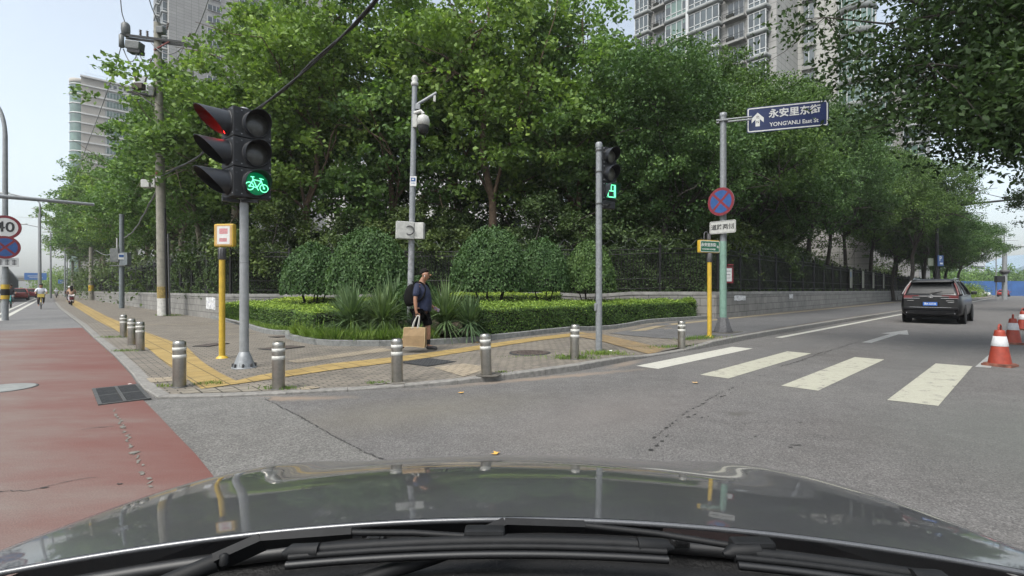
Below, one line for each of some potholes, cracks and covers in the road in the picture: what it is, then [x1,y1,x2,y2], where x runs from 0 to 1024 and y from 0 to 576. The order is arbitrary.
drain grate [92,384,151,406]
manhole cover [0,383,39,393]
